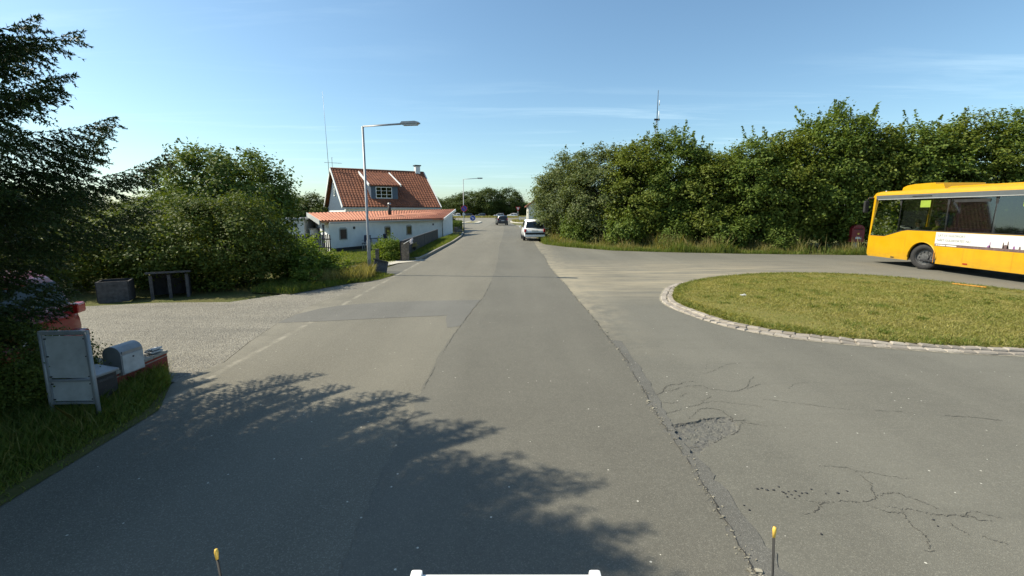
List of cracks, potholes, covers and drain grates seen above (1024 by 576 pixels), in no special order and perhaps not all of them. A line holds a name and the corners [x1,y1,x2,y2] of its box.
crack [801,466,1007,552]
crack [546,260,765,576]
